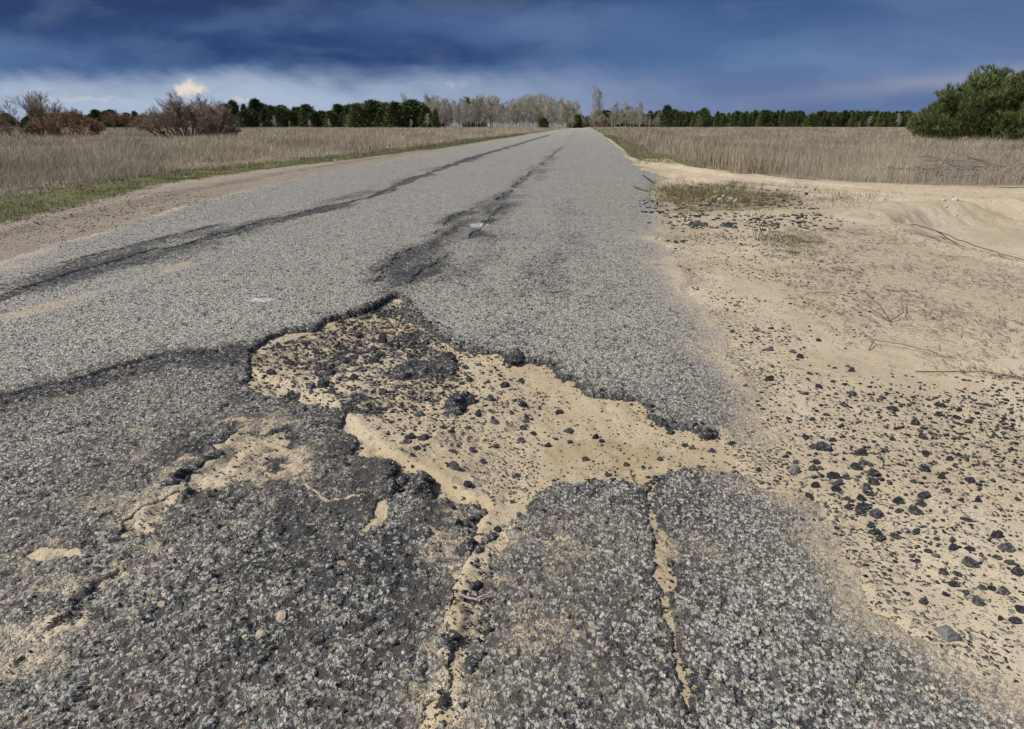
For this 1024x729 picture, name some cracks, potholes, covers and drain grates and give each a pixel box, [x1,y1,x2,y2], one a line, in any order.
pothole [246,298,742,540]
crack [422,524,506,728]
crack [640,479,697,717]
